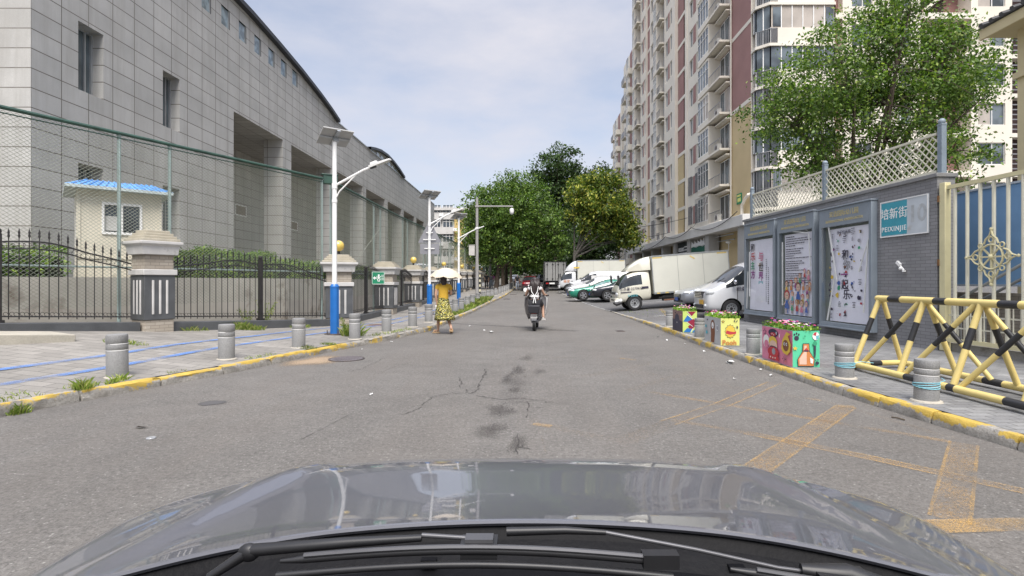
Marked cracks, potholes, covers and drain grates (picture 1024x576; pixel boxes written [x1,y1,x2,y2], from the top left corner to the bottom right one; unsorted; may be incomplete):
crack [405,369,554,454]
